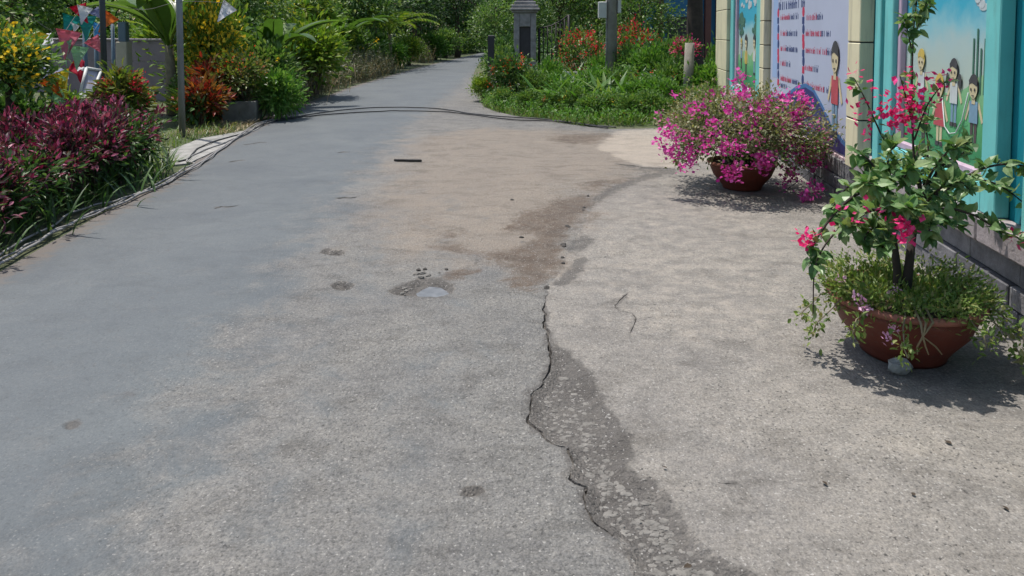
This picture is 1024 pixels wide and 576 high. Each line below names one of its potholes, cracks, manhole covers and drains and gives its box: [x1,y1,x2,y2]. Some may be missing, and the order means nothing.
pothole [388,277,456,298]
pothole [462,485,486,497]
pothole [329,281,356,291]
pothole [319,247,346,256]
pothole [62,419,81,430]
crack [526,292,636,546]
